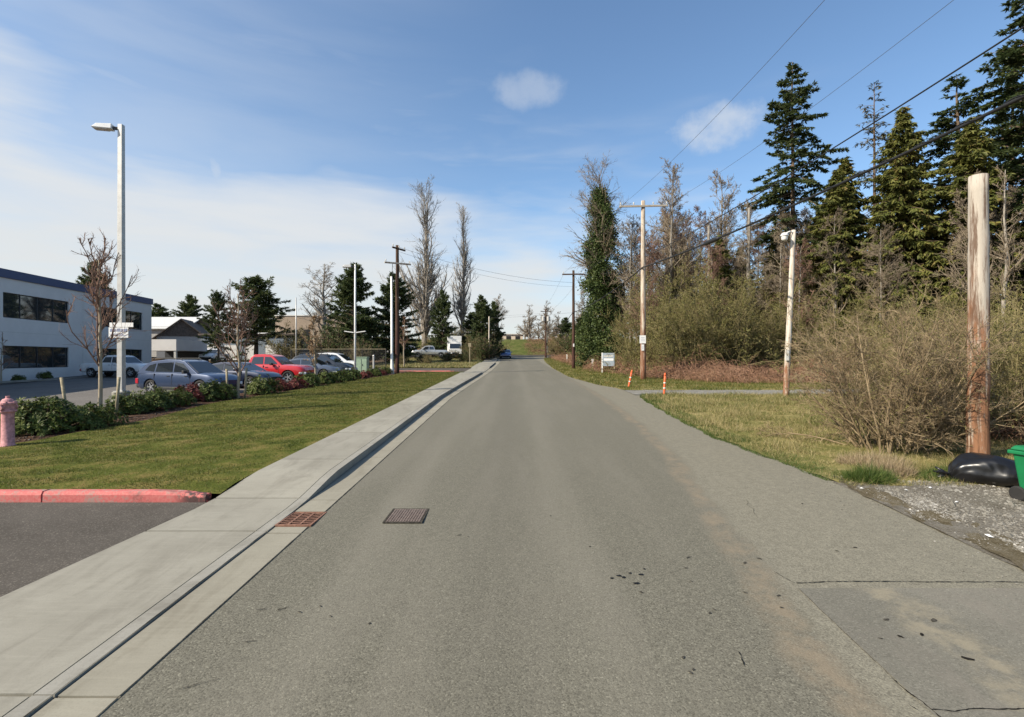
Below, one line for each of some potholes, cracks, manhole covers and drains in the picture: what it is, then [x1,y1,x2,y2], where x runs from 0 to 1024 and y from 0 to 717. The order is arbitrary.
drain grate [275,512,327,527]
